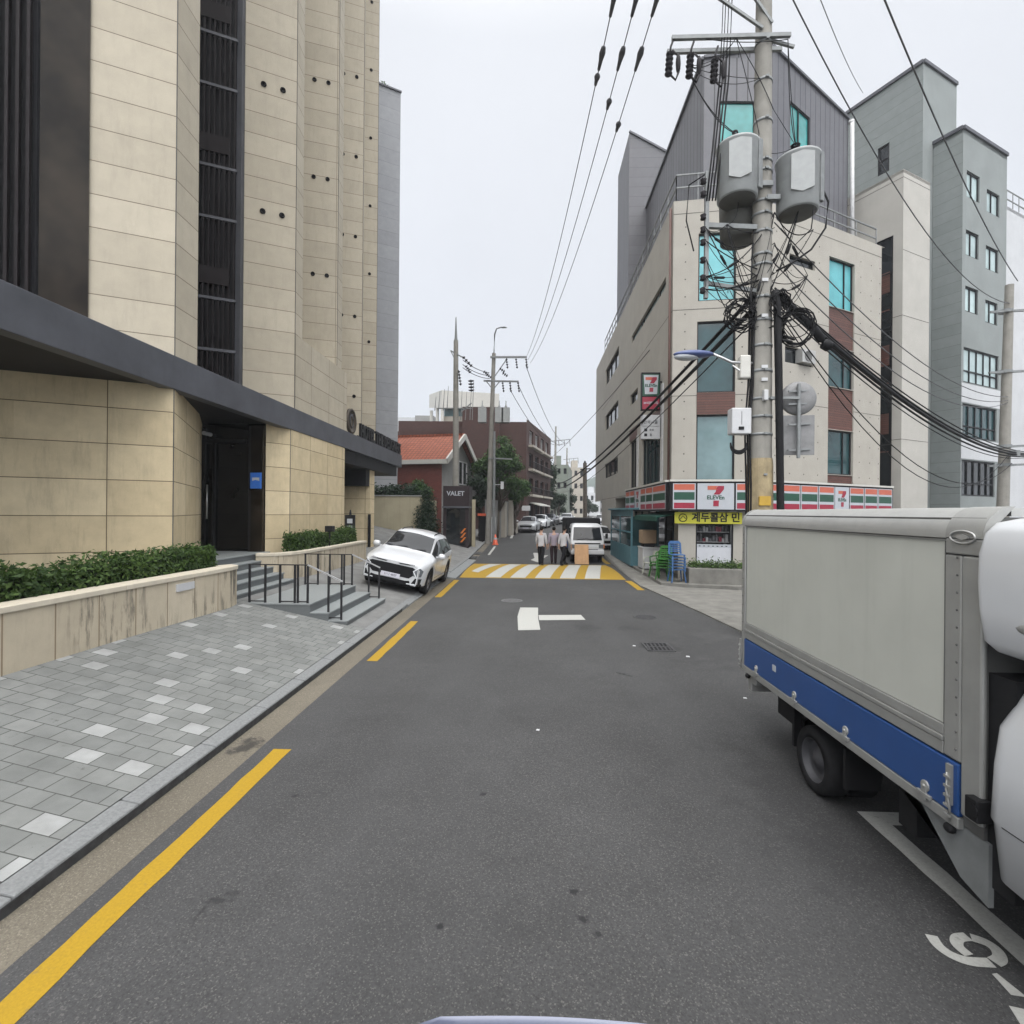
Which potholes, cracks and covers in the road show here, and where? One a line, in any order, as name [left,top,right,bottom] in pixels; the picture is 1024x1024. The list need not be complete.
drain grate [641,642,676,652]
